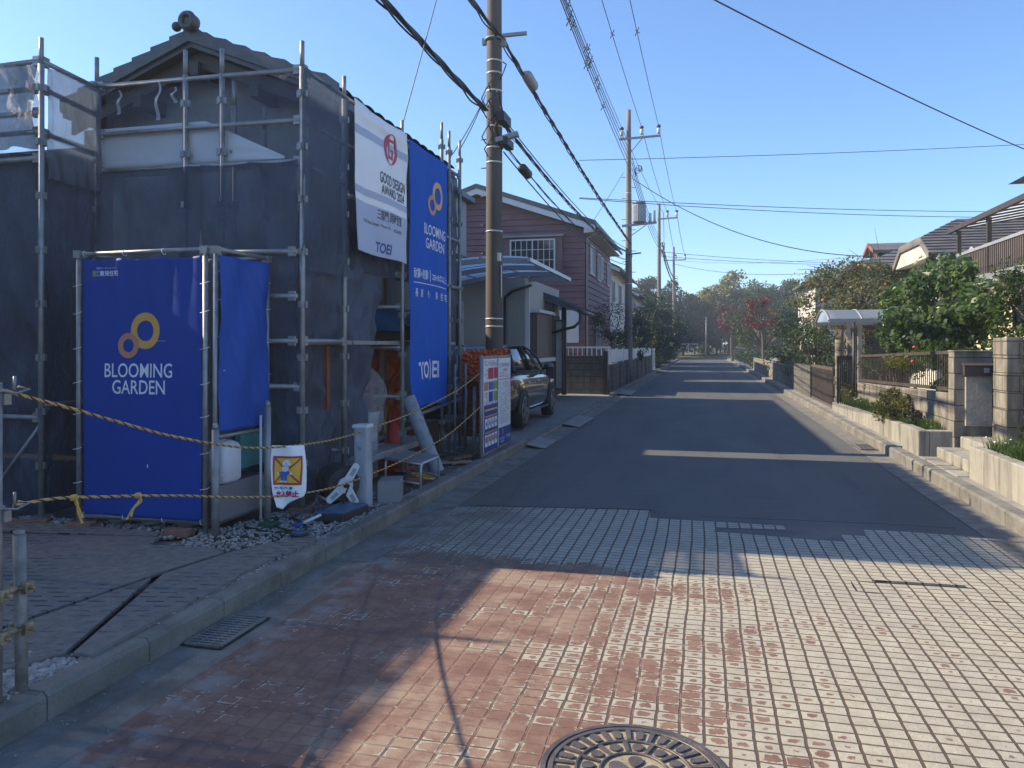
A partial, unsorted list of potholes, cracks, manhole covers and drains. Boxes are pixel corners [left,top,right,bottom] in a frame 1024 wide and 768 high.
drain grate [180,613,271,650]
manhole cover [539,724,727,768]
